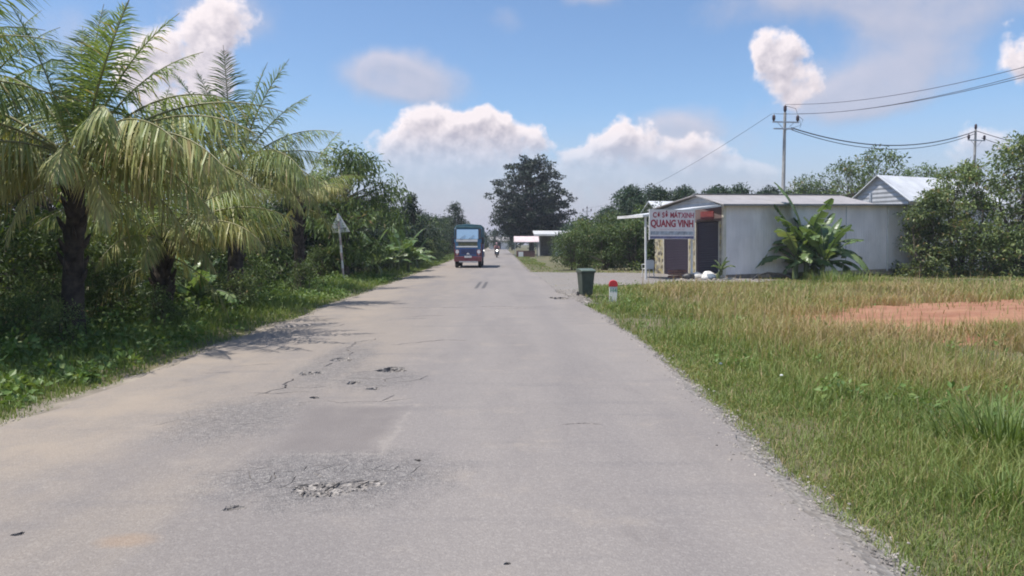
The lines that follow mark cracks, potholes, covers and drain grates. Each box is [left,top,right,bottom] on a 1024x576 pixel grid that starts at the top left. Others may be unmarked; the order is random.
crack [255,324,426,403]
pothole [291,480,388,498]
crack [237,464,423,498]
